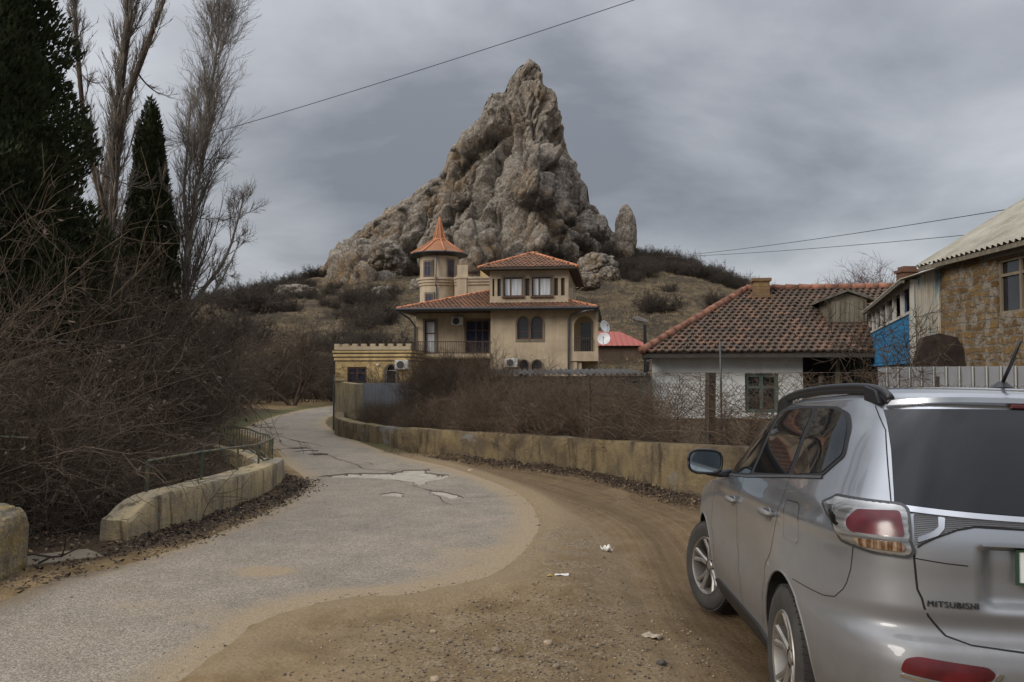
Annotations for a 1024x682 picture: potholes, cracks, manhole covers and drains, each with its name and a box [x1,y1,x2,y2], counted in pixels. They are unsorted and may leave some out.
pothole [315,469,449,485]
pothole [423,488,465,499]
crack [271,423,512,506]
